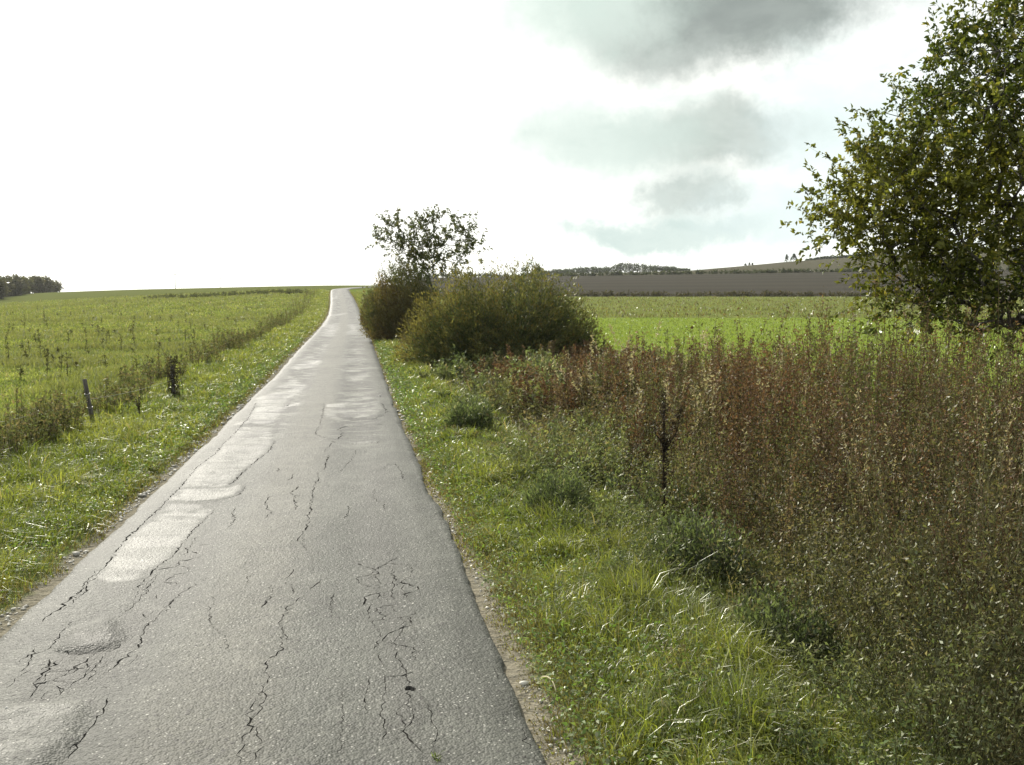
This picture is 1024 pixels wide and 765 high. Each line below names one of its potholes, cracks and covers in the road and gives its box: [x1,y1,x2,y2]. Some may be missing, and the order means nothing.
crack [5,403,389,699]
crack [353,559,446,752]
crack [236,565,335,762]
crack [62,698,108,764]
